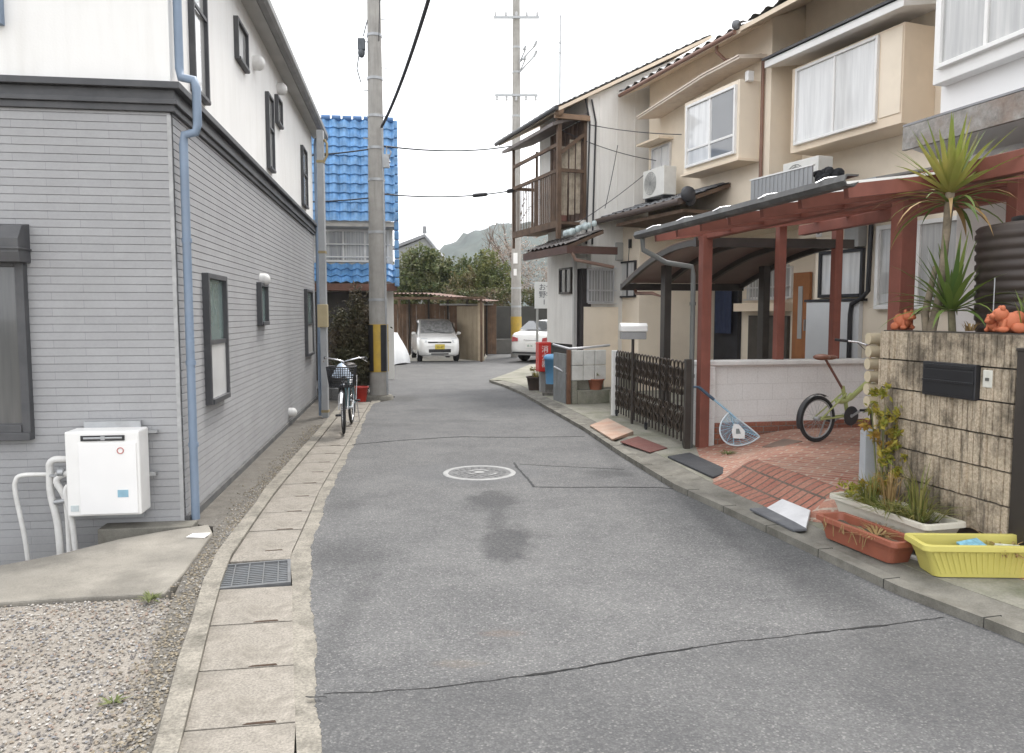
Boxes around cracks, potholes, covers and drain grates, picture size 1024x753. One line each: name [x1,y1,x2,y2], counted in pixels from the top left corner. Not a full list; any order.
manhole cover [443,465,516,480]
drain grate [220,559,291,590]
crack [325,617,942,694]
